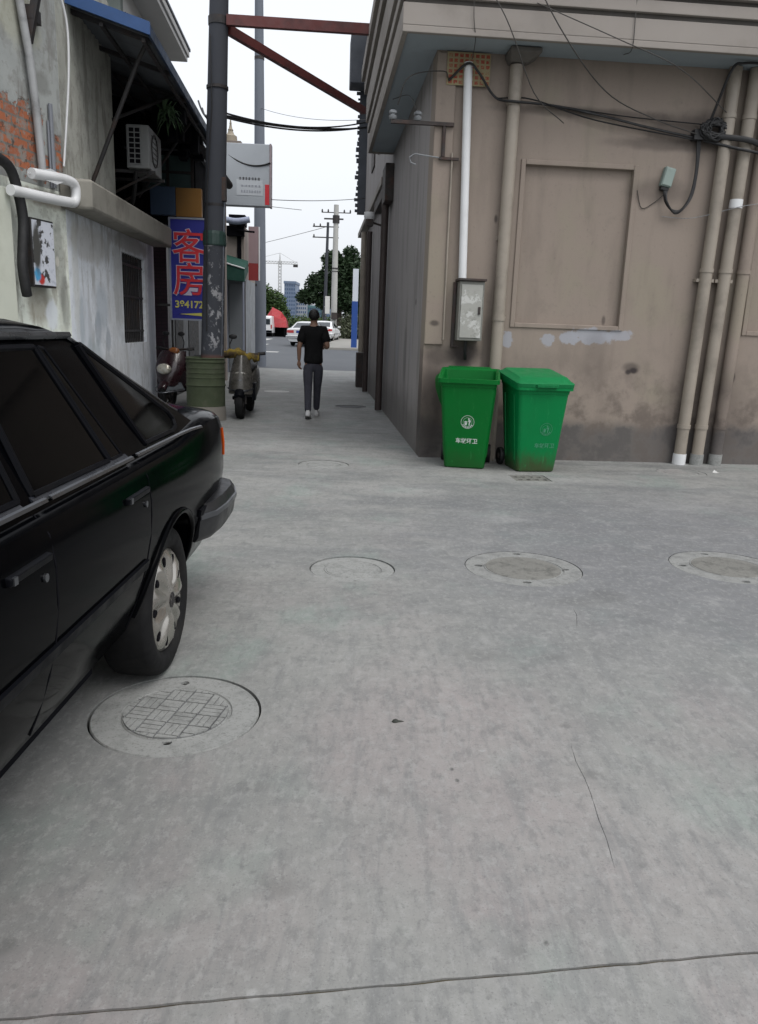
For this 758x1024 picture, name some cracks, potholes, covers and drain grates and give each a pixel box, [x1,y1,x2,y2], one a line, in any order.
manhole cover [310,558,394,582]
manhole cover [299,461,348,469]
manhole cover [668,551,758,585]
manhole cover [465,552,582,587]
manhole cover [89,677,259,758]
